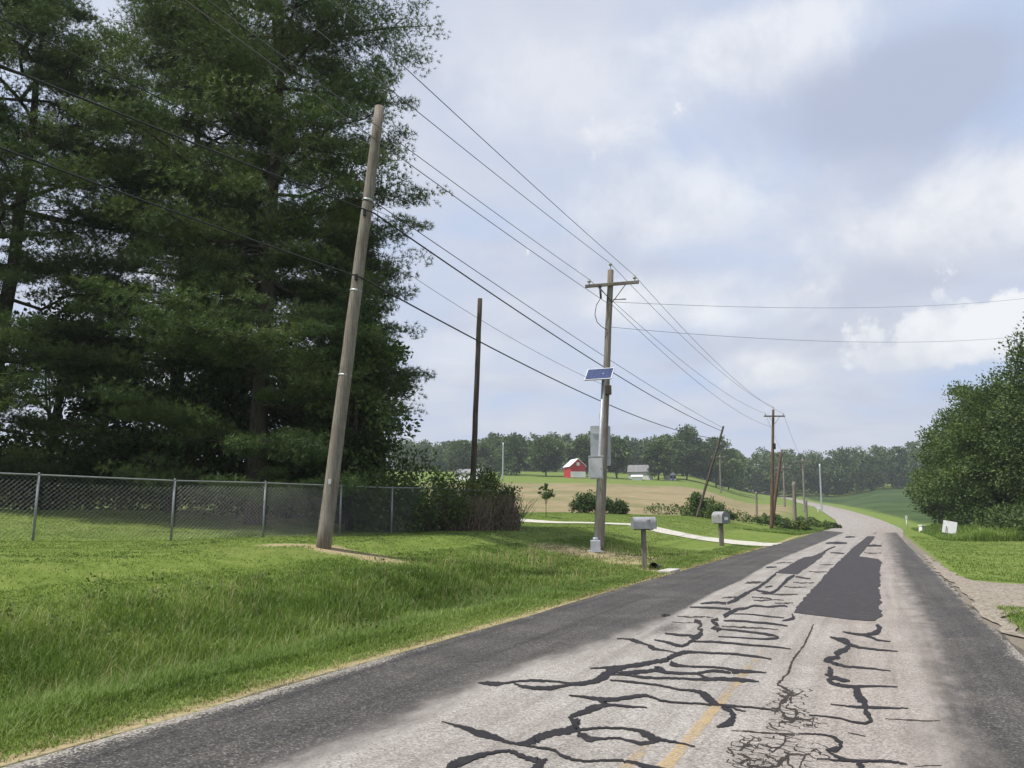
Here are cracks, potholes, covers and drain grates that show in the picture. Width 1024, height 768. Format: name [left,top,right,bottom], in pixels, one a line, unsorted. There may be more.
crack [665,546,940,768]
